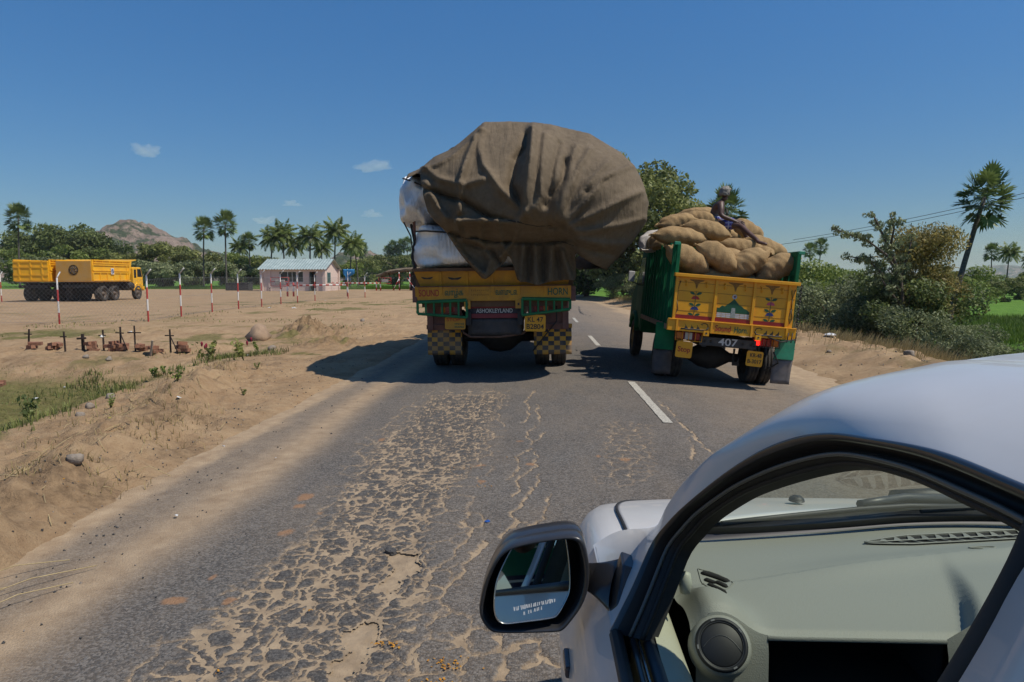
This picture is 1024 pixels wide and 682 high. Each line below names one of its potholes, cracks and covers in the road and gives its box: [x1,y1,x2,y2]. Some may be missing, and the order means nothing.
crack [128,389,561,682]
pothole [377,553,420,594]
